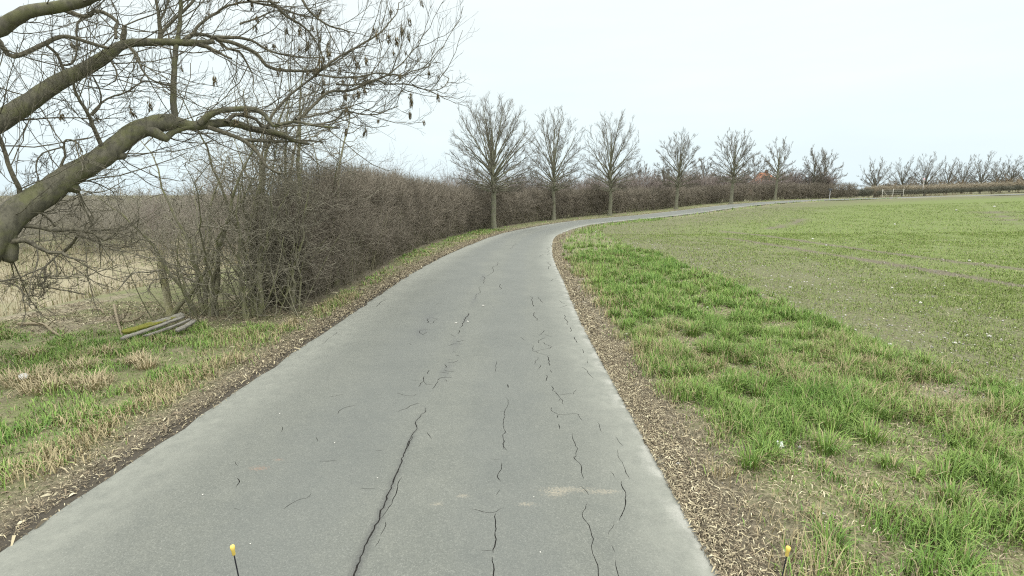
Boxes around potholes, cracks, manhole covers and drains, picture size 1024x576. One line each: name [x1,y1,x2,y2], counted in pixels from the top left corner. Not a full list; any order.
crack [402,304,469,410]
crack [475,405,508,576]
crack [522,298,630,576]
